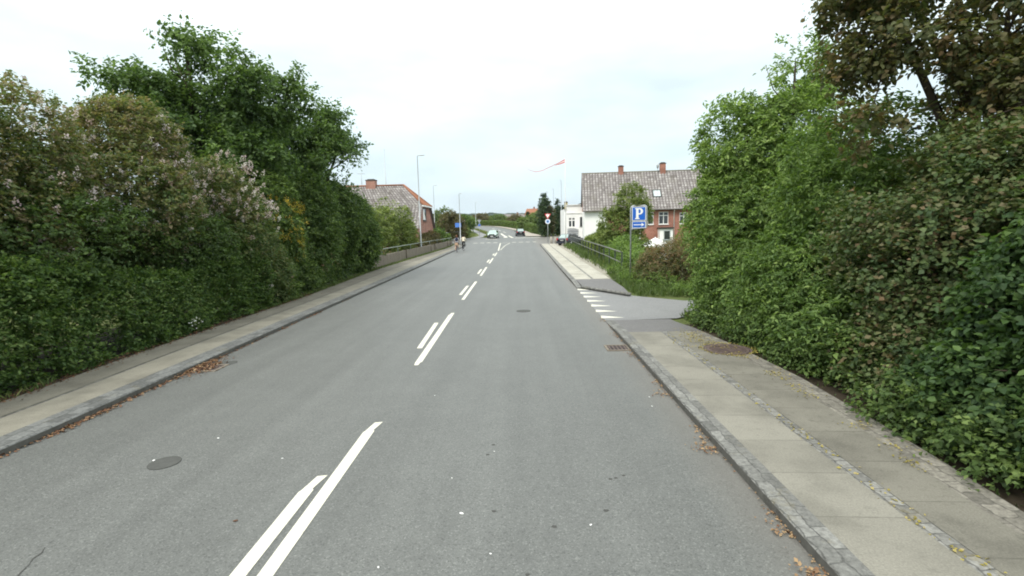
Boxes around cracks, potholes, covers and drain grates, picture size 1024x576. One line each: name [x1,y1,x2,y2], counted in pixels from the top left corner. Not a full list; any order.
manhole cover [147,456,182,470]
manhole cover [703,344,752,355]
